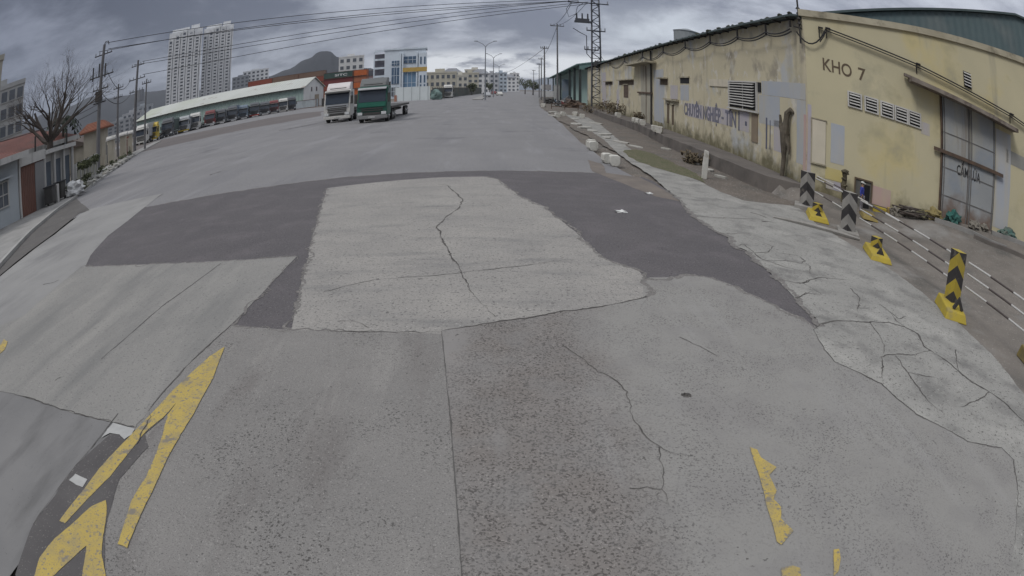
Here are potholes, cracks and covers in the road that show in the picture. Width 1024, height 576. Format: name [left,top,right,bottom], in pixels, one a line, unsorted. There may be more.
crack [562,344,714,496]
crack [321,184,646,333]
crack [701,212,1024,421]
